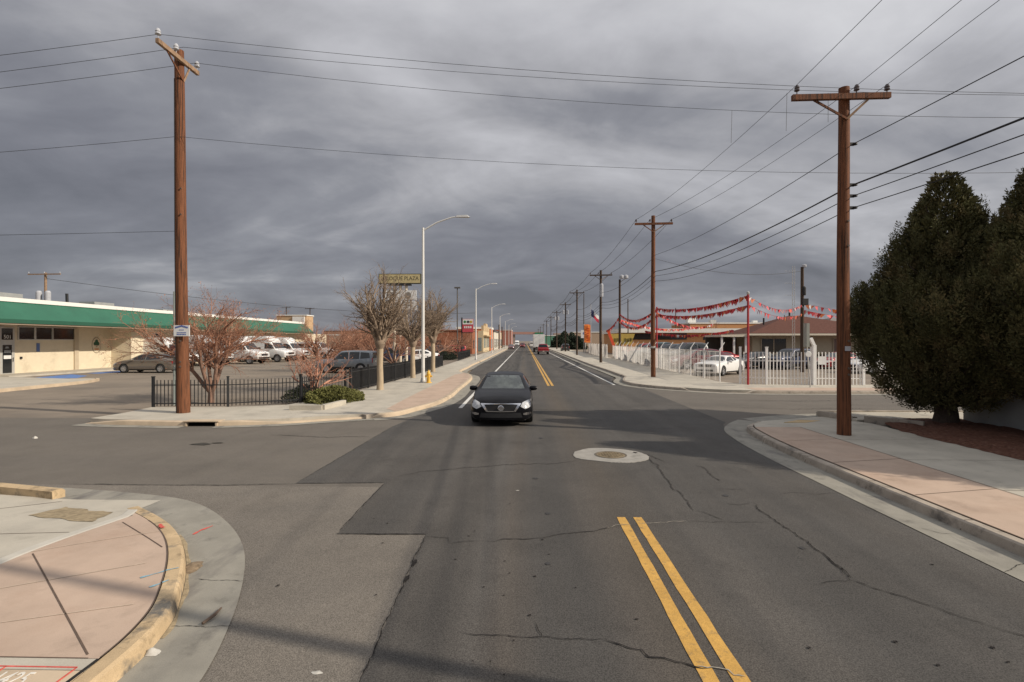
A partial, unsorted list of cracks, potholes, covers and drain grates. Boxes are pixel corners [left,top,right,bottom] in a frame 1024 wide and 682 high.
crack [642,453,1022,635]
crack [359,536,476,682]
crack [496,524,620,541]
manhole cover [573,448,649,463]
crack [463,624,743,676]
